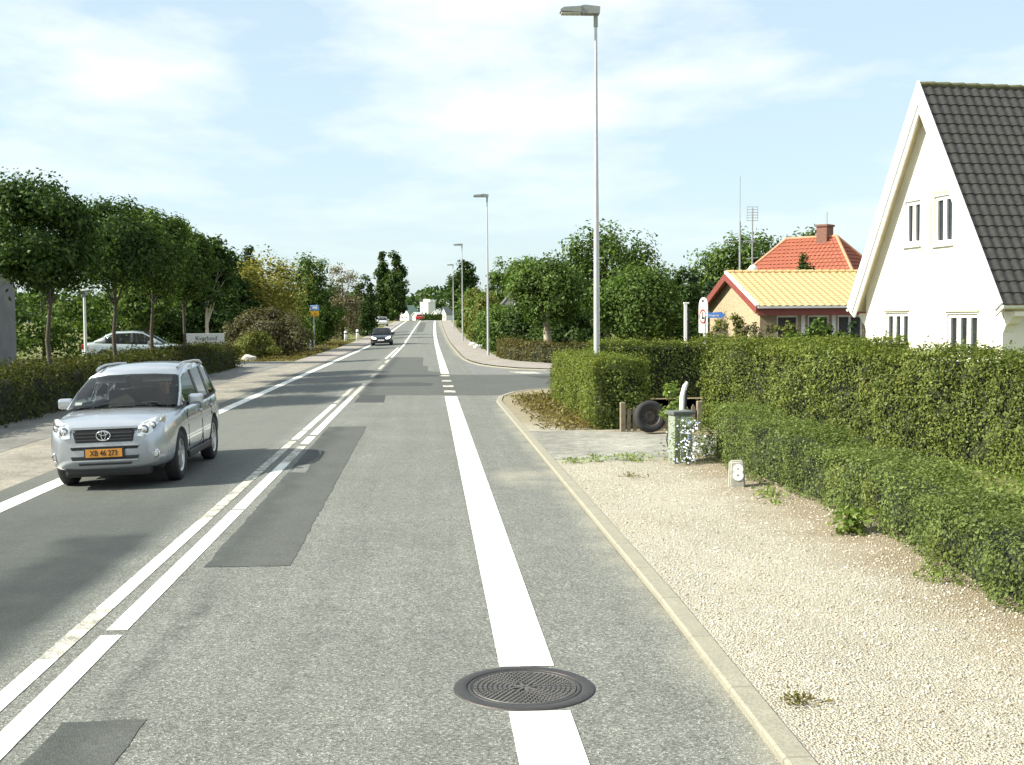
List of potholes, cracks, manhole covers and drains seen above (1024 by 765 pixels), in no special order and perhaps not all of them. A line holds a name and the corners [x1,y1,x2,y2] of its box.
manhole cover [453,666,595,711]
